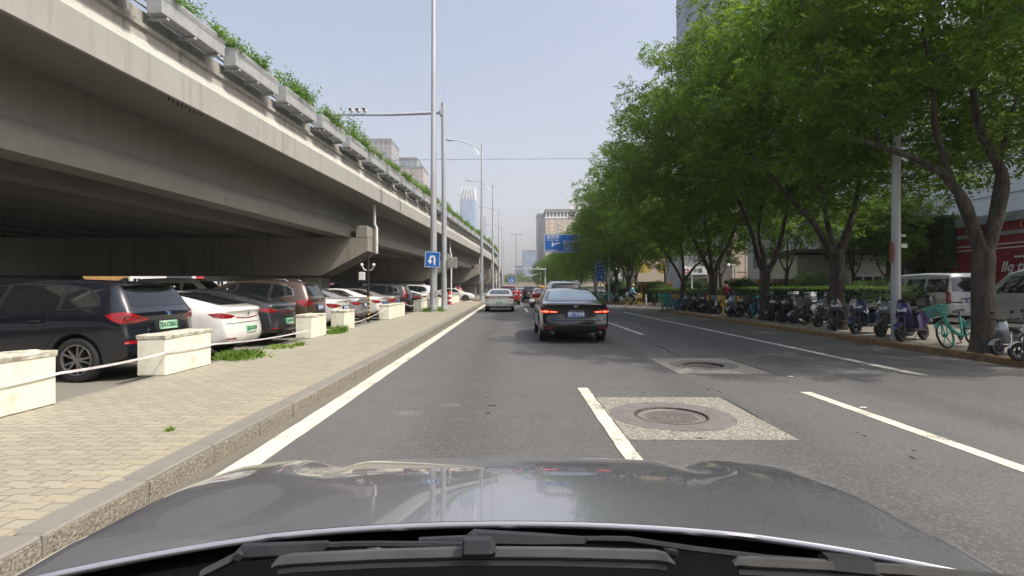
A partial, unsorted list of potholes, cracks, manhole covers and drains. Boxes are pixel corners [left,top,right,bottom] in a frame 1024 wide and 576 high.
manhole cover [669,360,739,370]
manhole cover [610,402,737,431]
